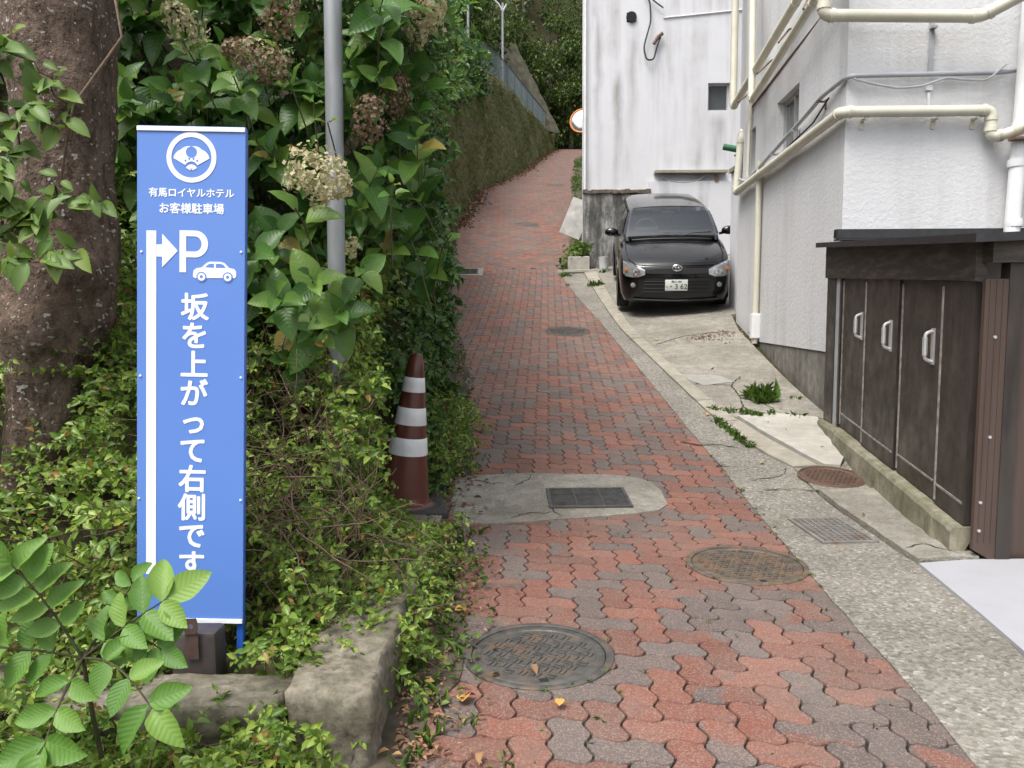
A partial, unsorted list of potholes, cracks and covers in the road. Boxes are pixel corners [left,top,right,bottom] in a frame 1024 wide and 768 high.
manhole cover [464,623,614,691]
manhole cover [686,545,810,586]
drain grate [787,517,879,544]
crack [696,377,773,415]
manhole cover [797,466,865,488]
drain grate [546,487,634,509]
manhole cover [545,326,590,336]
